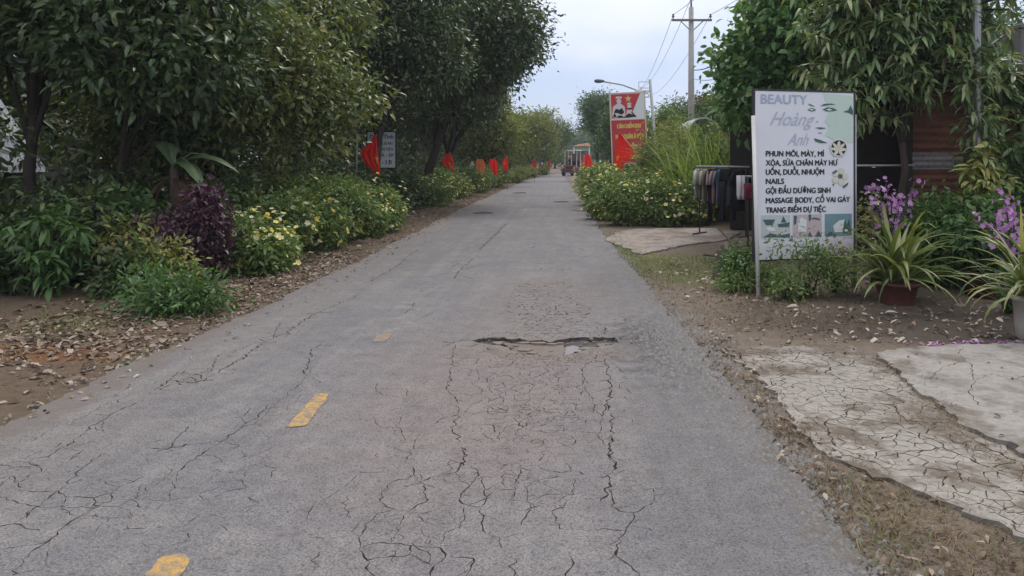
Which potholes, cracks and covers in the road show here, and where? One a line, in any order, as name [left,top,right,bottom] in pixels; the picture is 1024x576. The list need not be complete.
pothole [471,336,619,358]
crack [154,250,418,390]
crack [266,224,698,576]
crack [0,344,336,575]
